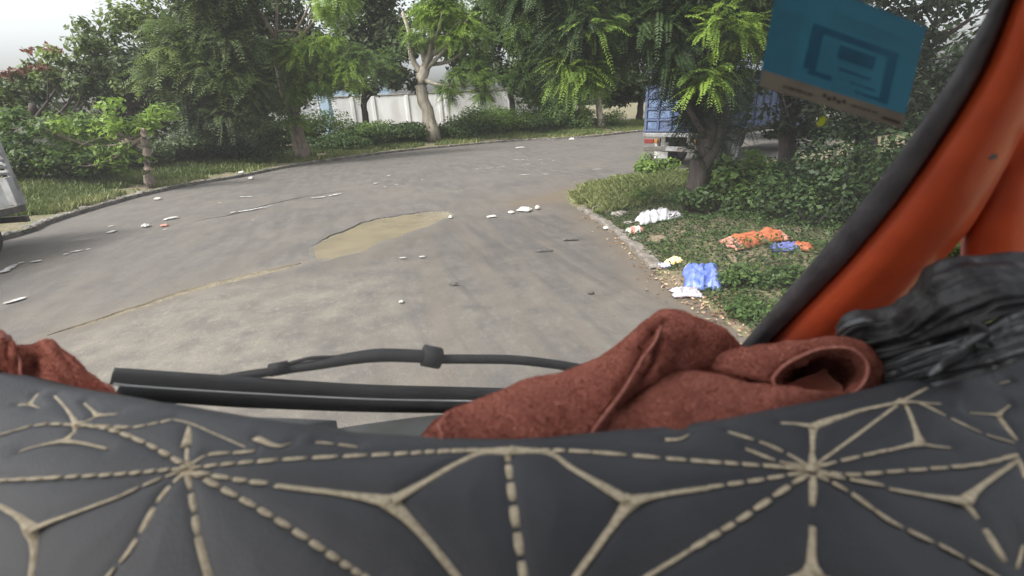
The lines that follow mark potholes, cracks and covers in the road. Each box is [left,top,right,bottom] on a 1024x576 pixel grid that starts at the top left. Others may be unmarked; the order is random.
crack [198,191,339,221]
